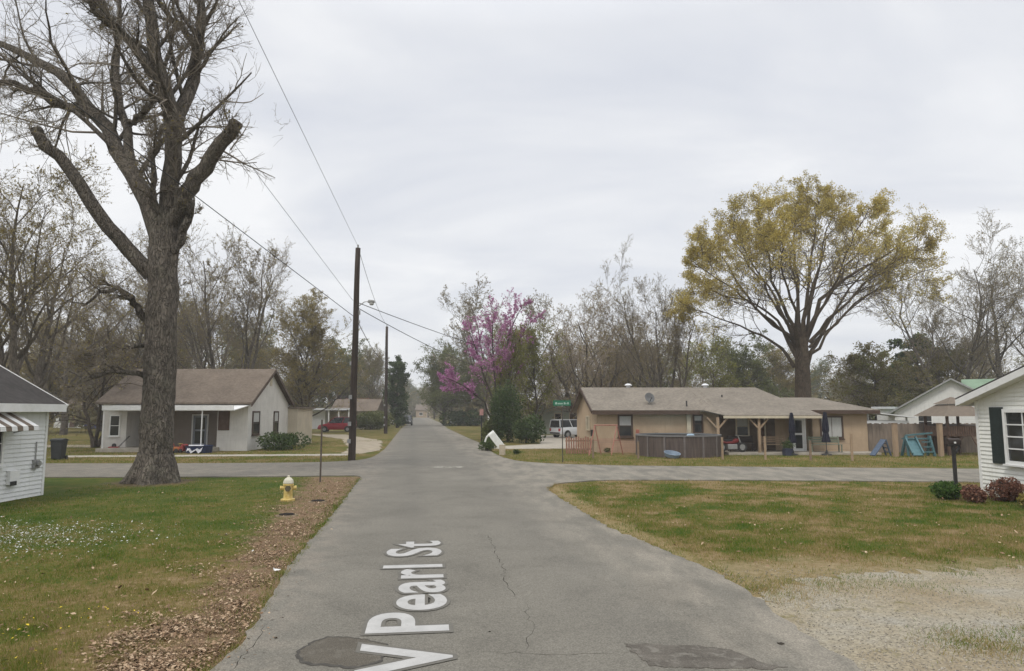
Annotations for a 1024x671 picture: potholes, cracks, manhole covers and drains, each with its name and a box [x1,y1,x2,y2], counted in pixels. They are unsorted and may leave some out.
crack [483,538,618,655]
